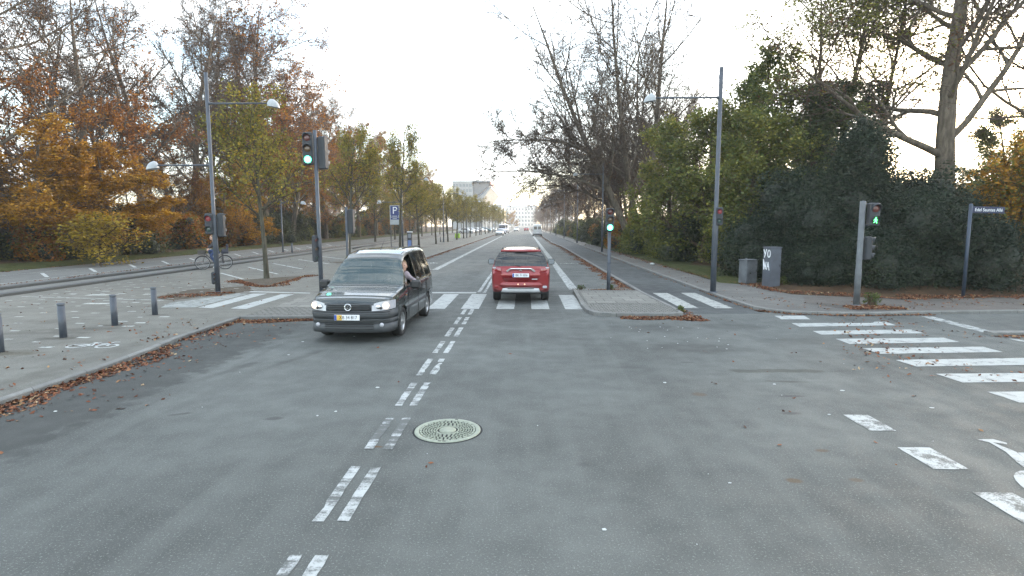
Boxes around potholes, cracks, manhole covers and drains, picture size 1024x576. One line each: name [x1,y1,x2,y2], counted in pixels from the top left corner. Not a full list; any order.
manhole cover [412,419,483,444]
